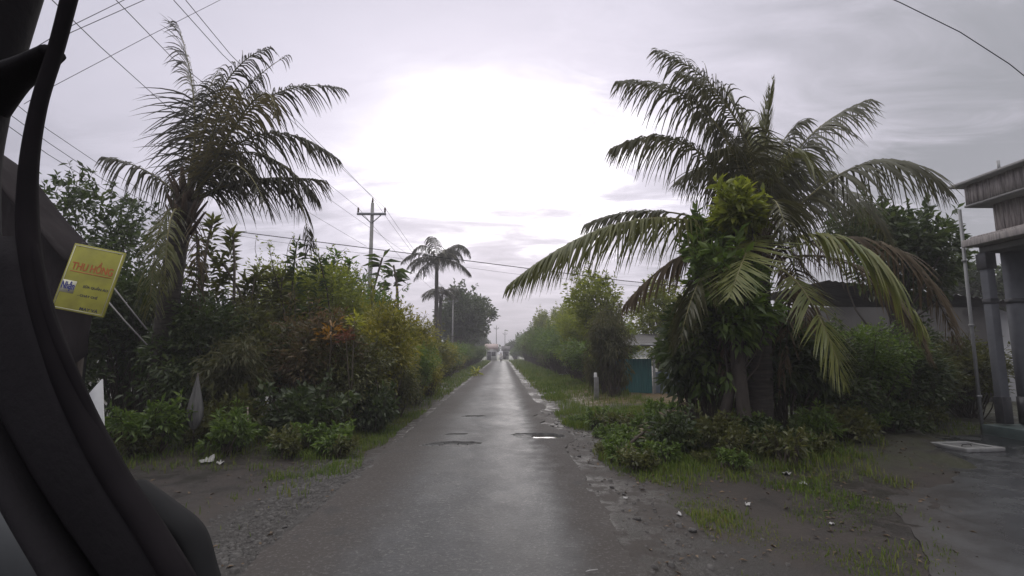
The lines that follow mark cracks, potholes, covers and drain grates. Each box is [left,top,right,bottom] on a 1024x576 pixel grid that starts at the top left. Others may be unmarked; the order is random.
manhole cover [931,441,1006,453]
